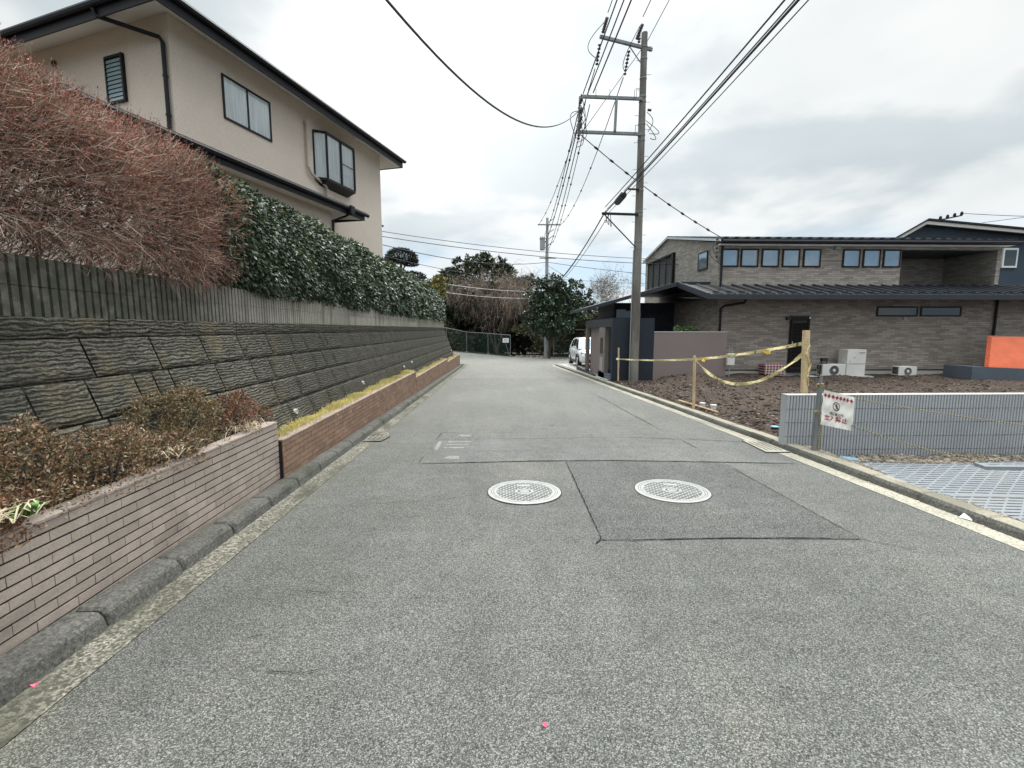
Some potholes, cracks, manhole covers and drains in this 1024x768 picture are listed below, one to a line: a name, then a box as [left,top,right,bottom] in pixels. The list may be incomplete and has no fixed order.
manhole cover [634,479,713,503]
manhole cover [487,480,562,505]
